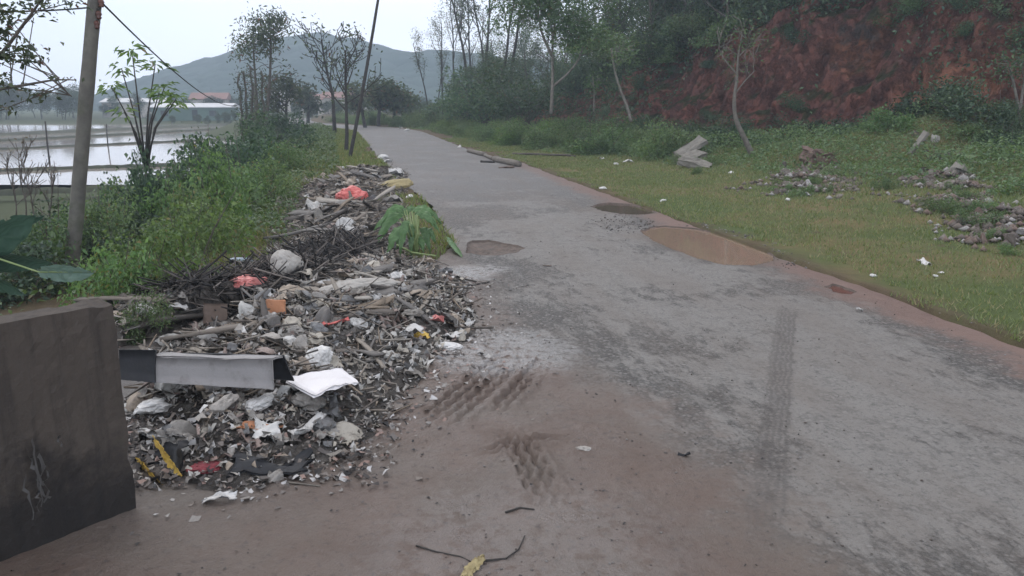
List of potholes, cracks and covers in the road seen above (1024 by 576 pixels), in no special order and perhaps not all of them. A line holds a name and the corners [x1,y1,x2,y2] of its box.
pothole [824,283,856,294]
pothole [466,240,525,255]
pothole [590,203,656,215]
pothole [640,226,775,266]
